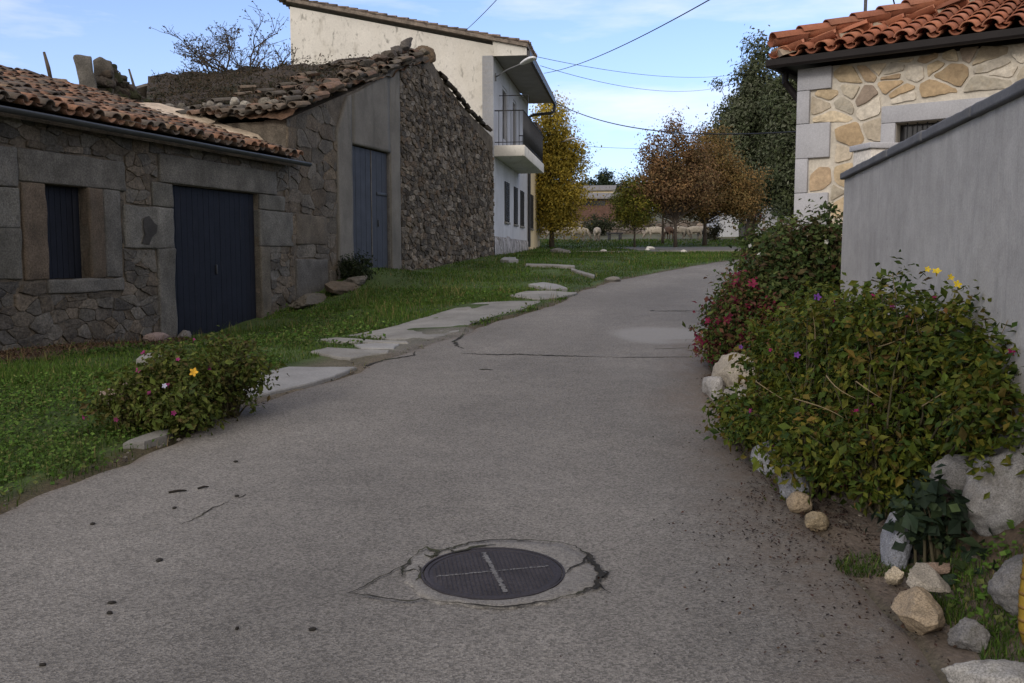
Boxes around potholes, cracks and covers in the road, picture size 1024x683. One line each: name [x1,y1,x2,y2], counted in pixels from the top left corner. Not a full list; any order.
manhole cover [404,541,601,609]
crack [347,539,611,607]
crack [452,305,599,370]
